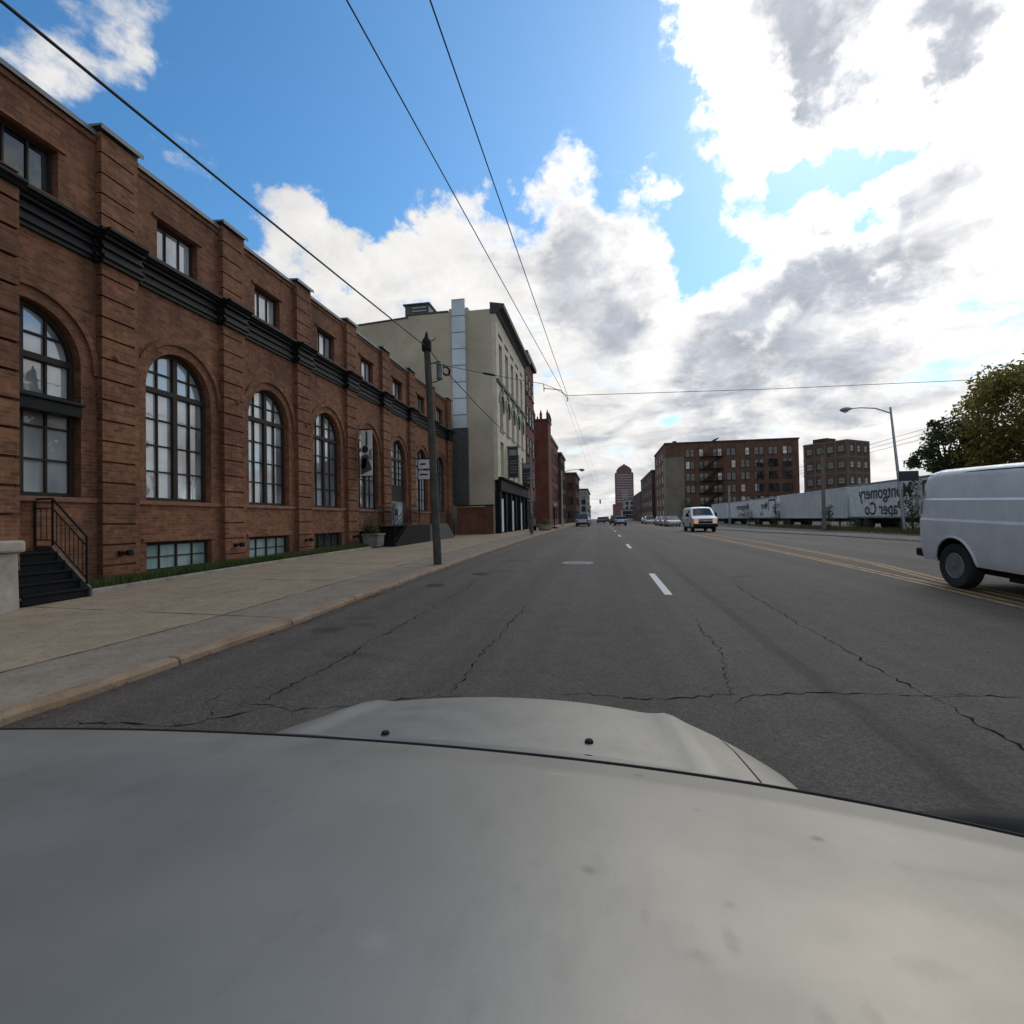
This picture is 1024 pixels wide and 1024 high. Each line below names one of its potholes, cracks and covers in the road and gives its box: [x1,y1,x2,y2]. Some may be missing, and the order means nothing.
crack [564,585,1024,750]
crack [245,581,528,711]
